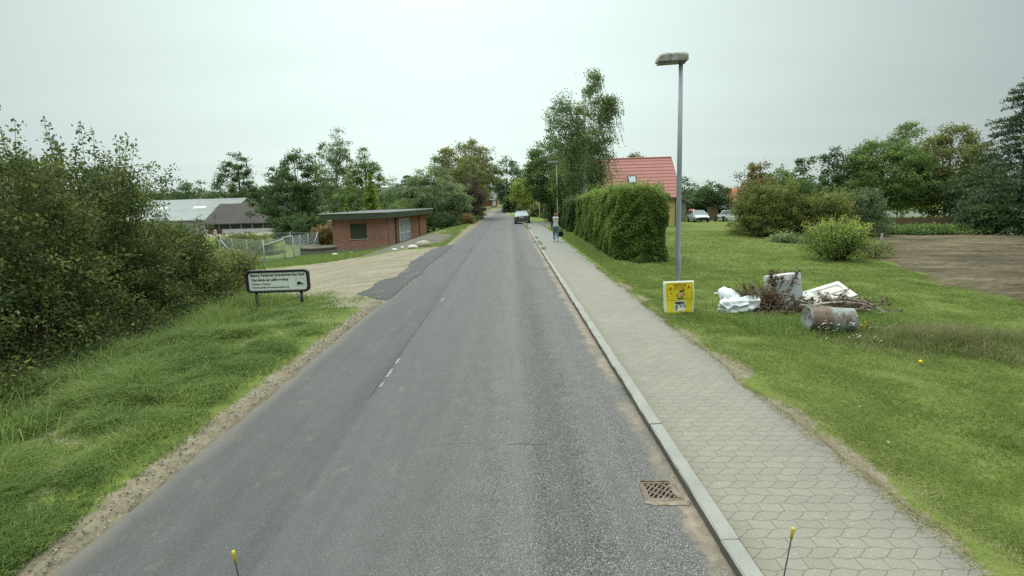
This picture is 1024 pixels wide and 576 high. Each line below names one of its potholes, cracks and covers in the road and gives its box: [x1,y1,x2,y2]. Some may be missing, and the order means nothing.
drain grate [637,480,684,501]
